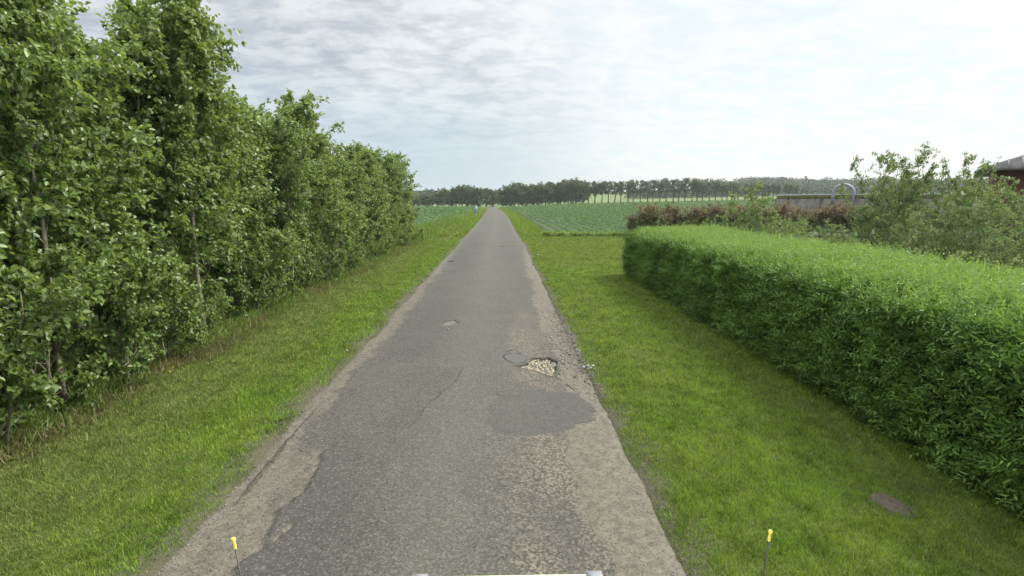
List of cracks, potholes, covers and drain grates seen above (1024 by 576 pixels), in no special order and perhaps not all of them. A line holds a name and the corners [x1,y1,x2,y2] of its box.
pothole [512,357,560,378]
crack [408,367,464,428]
crack [237,403,322,503]
